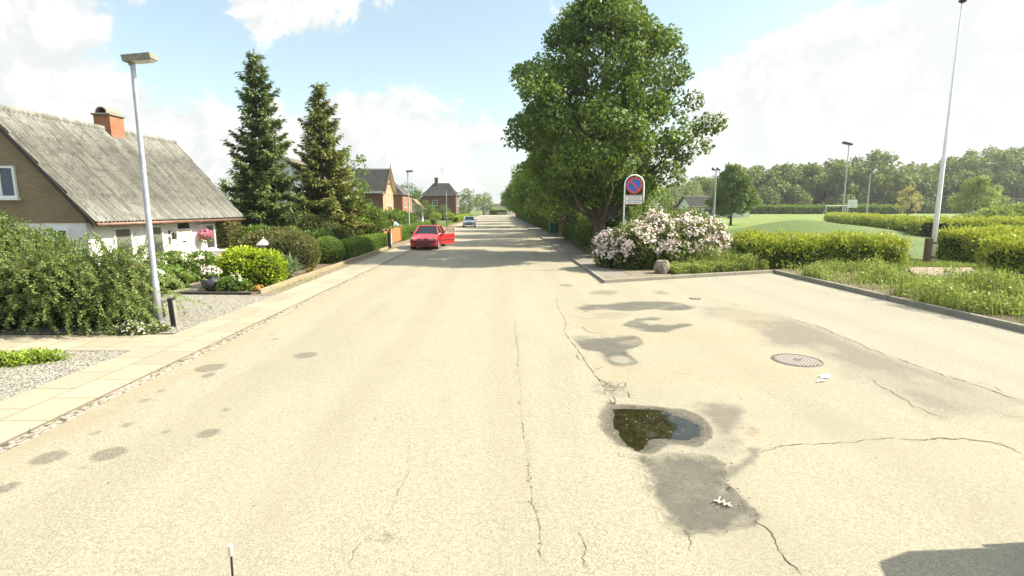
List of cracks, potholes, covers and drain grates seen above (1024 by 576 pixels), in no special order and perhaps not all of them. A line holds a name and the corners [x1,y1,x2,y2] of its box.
manhole cover [771,353,824,367]
pothole [596,400,714,455]
crack [514,315,545,562]
crack [769,437,1022,454]
crack [556,300,632,403]
crack [755,520,802,575]
